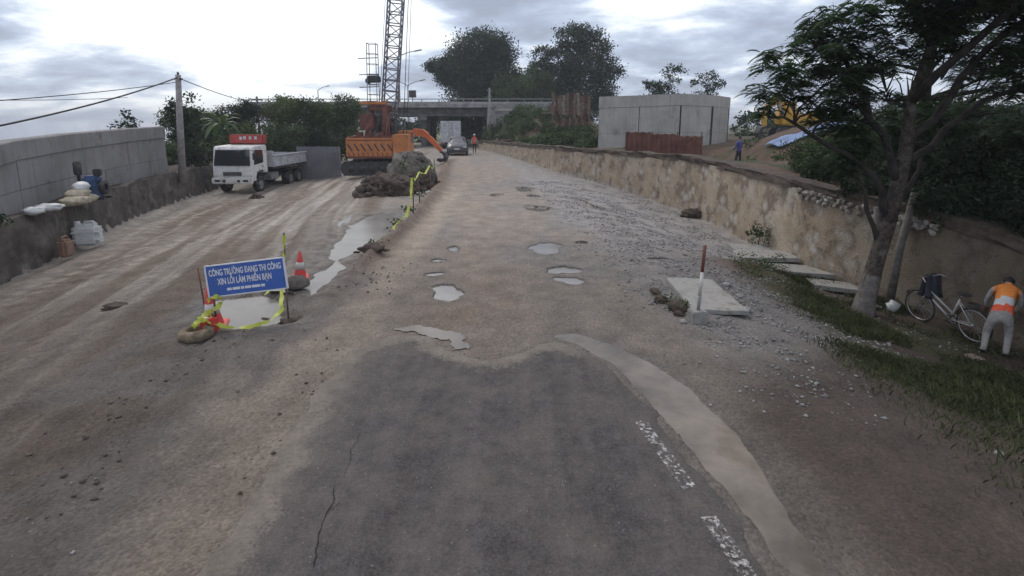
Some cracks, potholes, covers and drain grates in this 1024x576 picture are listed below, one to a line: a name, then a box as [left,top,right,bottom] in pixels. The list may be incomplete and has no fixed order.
pothole [544,265,586,275]
pothole [429,283,467,303]
crack [313,432,360,568]
pothole [549,276,588,285]
pothole [525,242,565,256]
